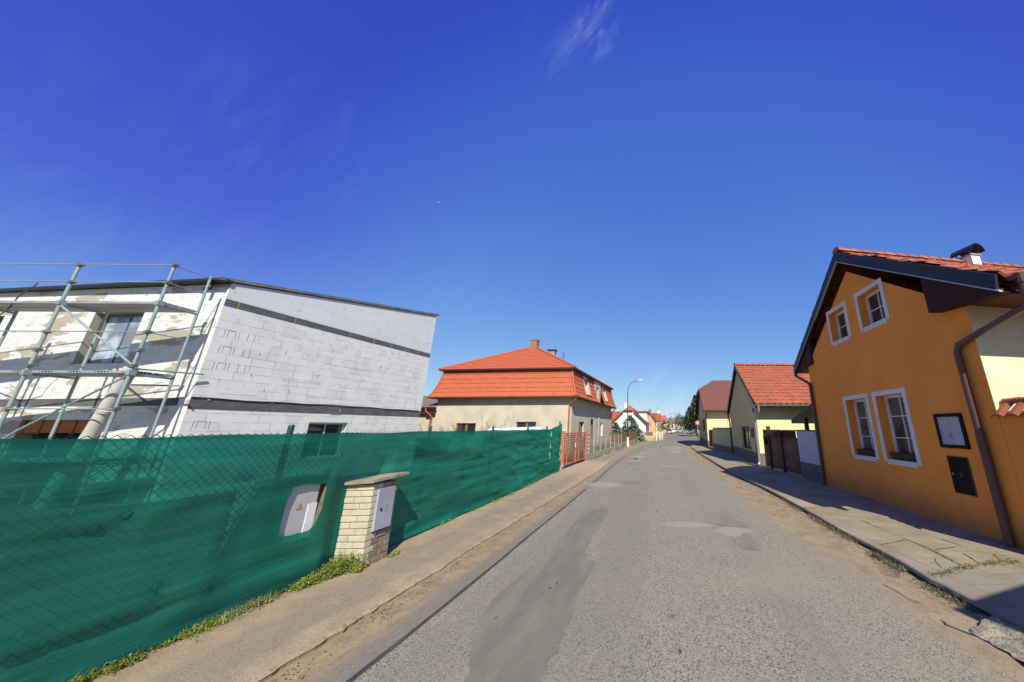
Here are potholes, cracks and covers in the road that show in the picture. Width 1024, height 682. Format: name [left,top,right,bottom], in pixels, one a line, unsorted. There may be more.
crack [862,520,1005,567]
crack [884,584,1023,663]
